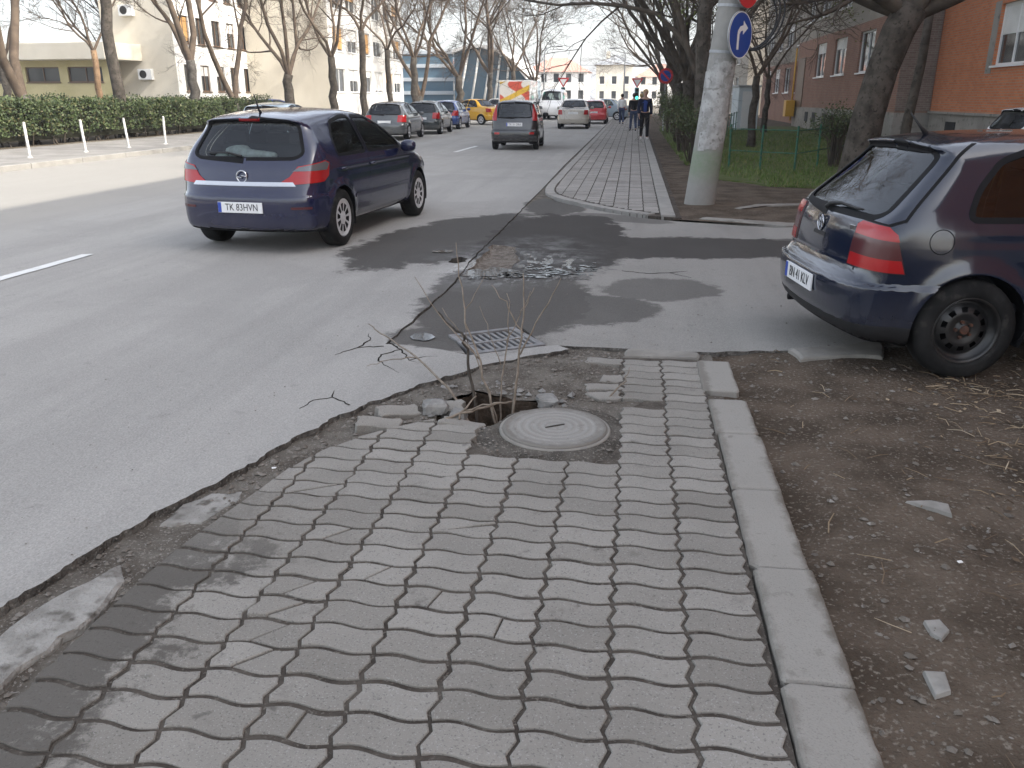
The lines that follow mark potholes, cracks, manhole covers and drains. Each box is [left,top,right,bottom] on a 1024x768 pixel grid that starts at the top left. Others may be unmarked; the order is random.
crack [335,334,427,373]
crack [299,391,350,409]
pothole [436,393,552,427]
manhole cover [499,408,611,452]
pothole [466,245,520,277]
